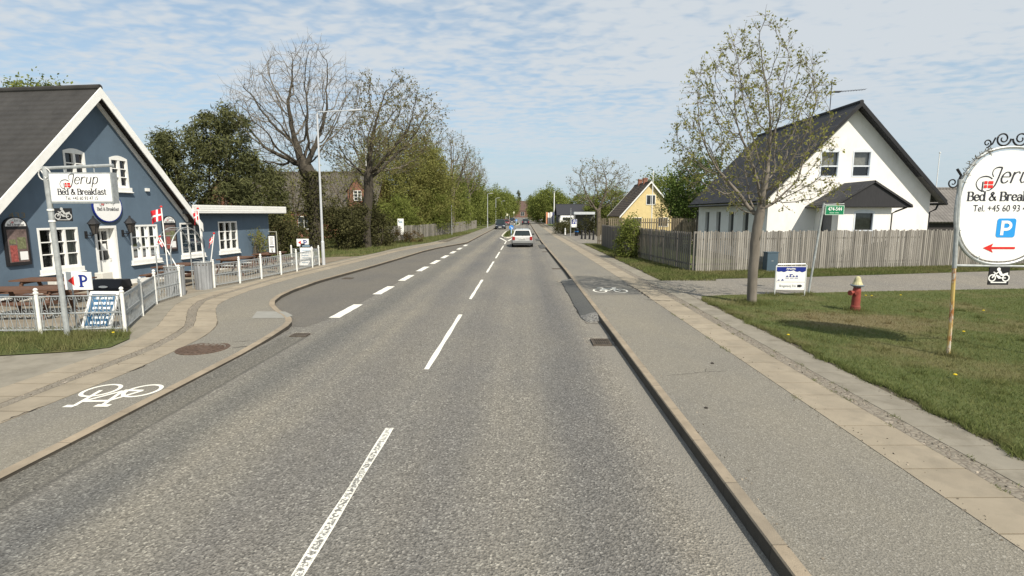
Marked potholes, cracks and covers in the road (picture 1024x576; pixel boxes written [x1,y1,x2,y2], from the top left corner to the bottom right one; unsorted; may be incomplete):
manhole cover [175,343,231,355]
drain grate [590,338,612,346]
